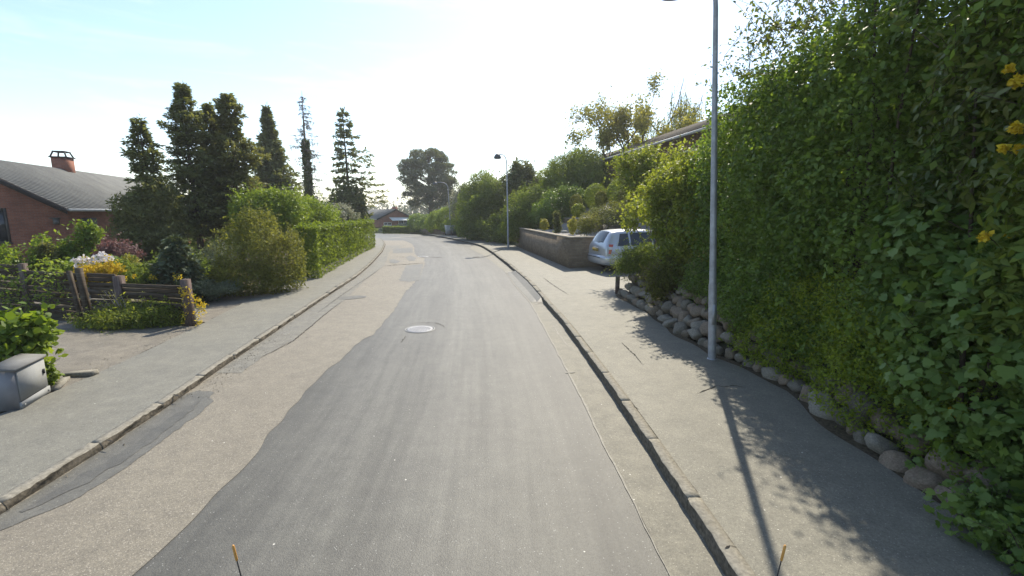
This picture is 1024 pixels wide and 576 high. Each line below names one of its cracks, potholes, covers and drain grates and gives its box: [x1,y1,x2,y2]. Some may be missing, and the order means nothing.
manhole cover [405,325,435,333]
